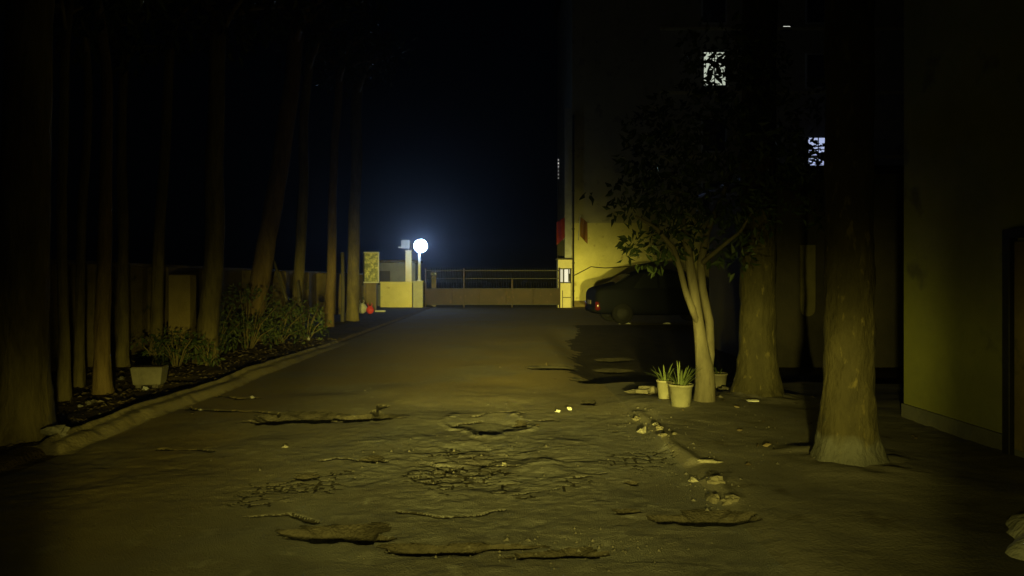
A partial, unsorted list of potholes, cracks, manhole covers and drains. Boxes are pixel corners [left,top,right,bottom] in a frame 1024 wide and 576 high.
pothole [275,522,398,545]
pothole [376,542,550,557]
pothole [445,412,531,435]
pothole [235,410,410,426]
pothole [646,509,763,527]
pothole [500,546,613,560]
crack [227,442,678,525]
